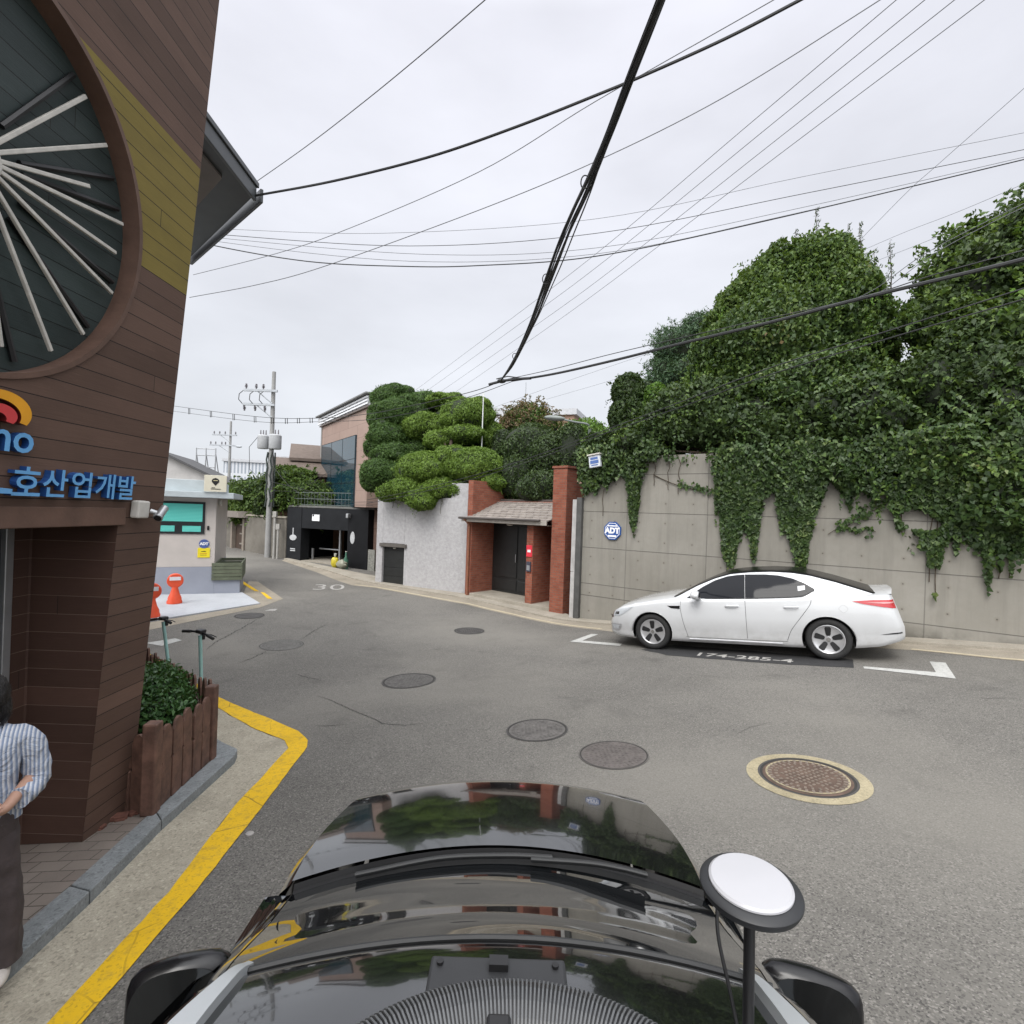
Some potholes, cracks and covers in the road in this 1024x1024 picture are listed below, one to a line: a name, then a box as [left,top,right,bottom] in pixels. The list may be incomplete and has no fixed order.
manhole cover [746,754,874,805]
manhole cover [579,741,649,769]
manhole cover [382,673,436,688]
crack [300,675,431,726]
manhole cover [259,639,304,650]
manhole cover [506,719,568,741]
